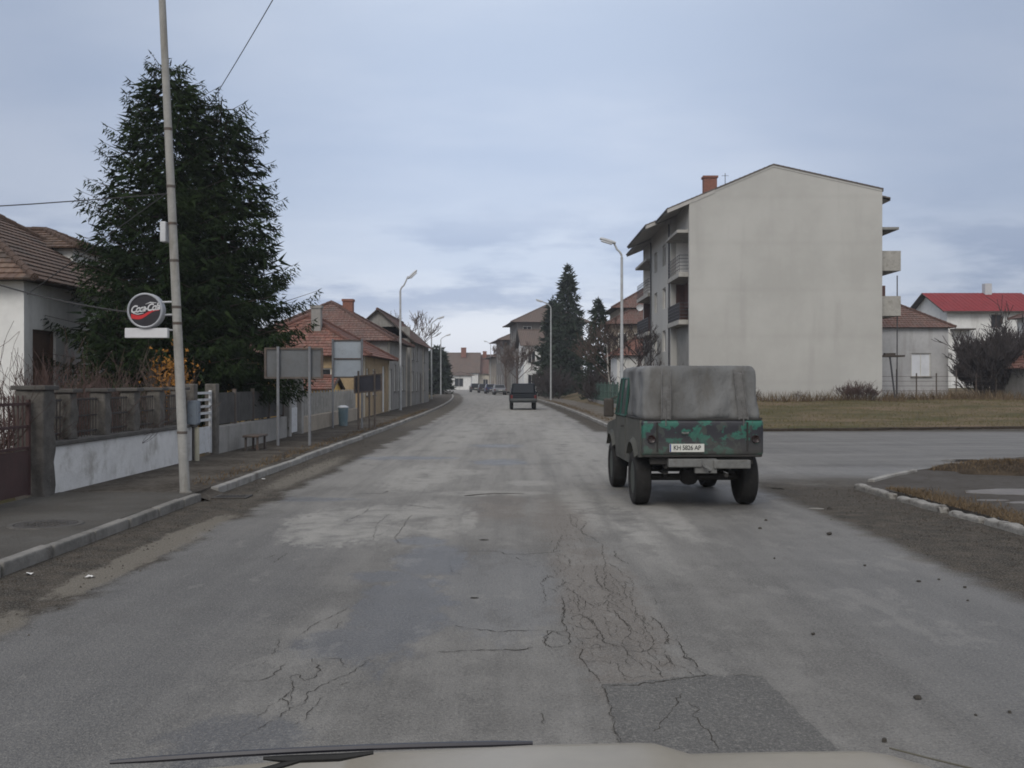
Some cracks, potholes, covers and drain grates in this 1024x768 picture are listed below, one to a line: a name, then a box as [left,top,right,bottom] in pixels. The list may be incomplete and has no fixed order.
crack [439,516,704,681]
crack [655,696,719,749]
crack [240,608,367,735]
manhole cover [6,519,85,530]
